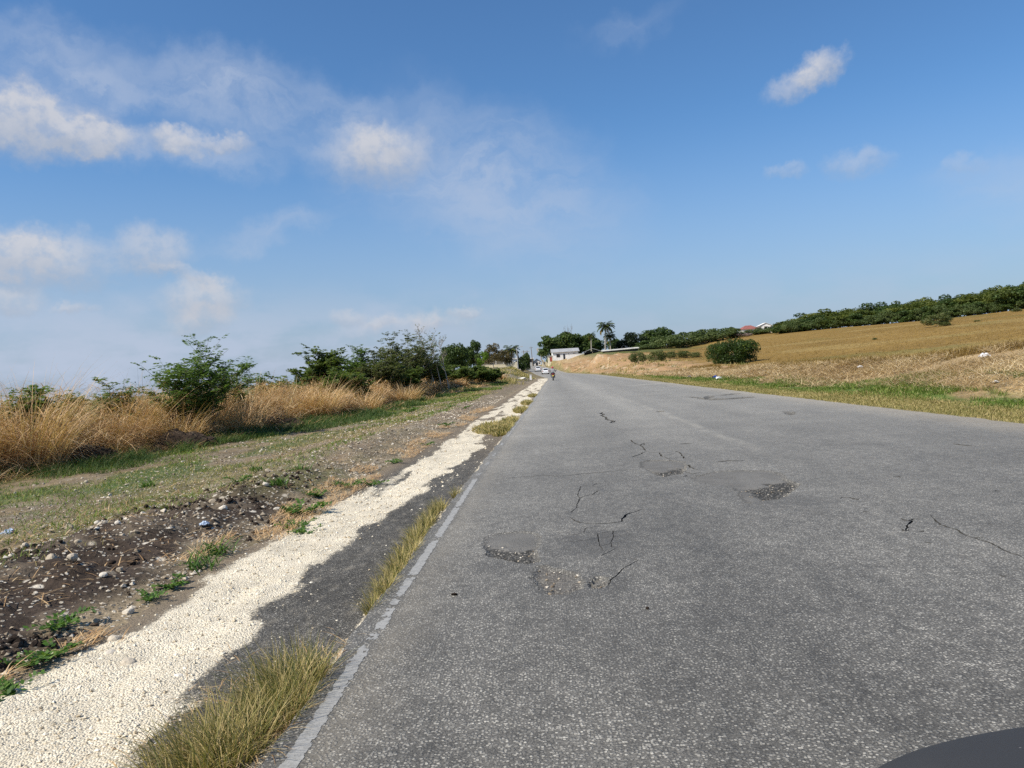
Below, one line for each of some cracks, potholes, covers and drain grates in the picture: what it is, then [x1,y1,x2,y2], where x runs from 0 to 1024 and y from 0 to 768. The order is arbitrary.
pothole [639,460,689,477]
crack [502,440,744,586]
pothole [481,531,542,564]
pothole [587,576,611,589]
pothole [528,565,586,595]
crack [901,516,1024,558]
pothole [690,470,800,504]
